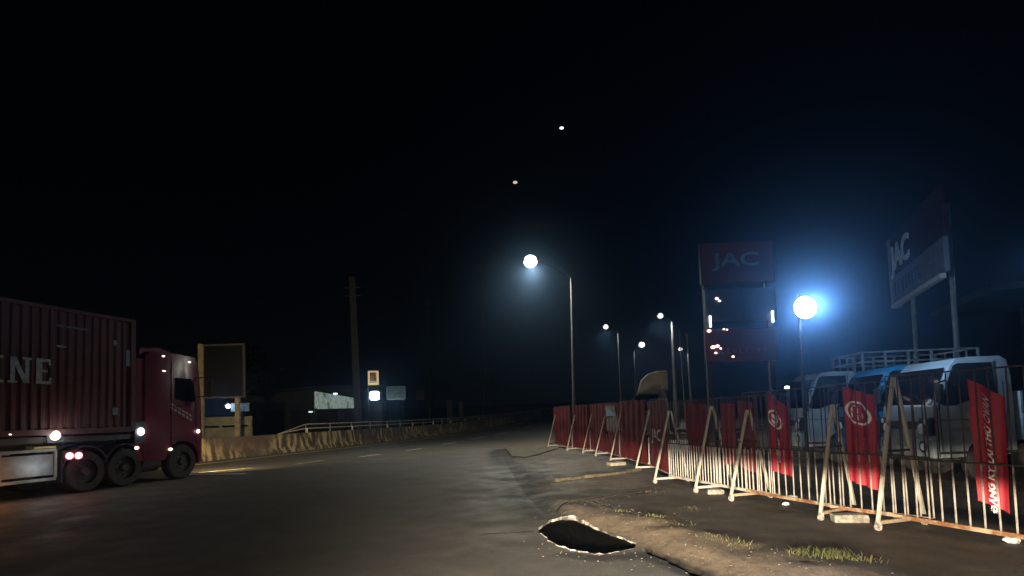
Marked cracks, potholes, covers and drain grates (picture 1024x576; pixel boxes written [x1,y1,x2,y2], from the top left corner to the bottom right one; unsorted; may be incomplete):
crack [556,491,660,517]
pothole [523,515,637,564]
